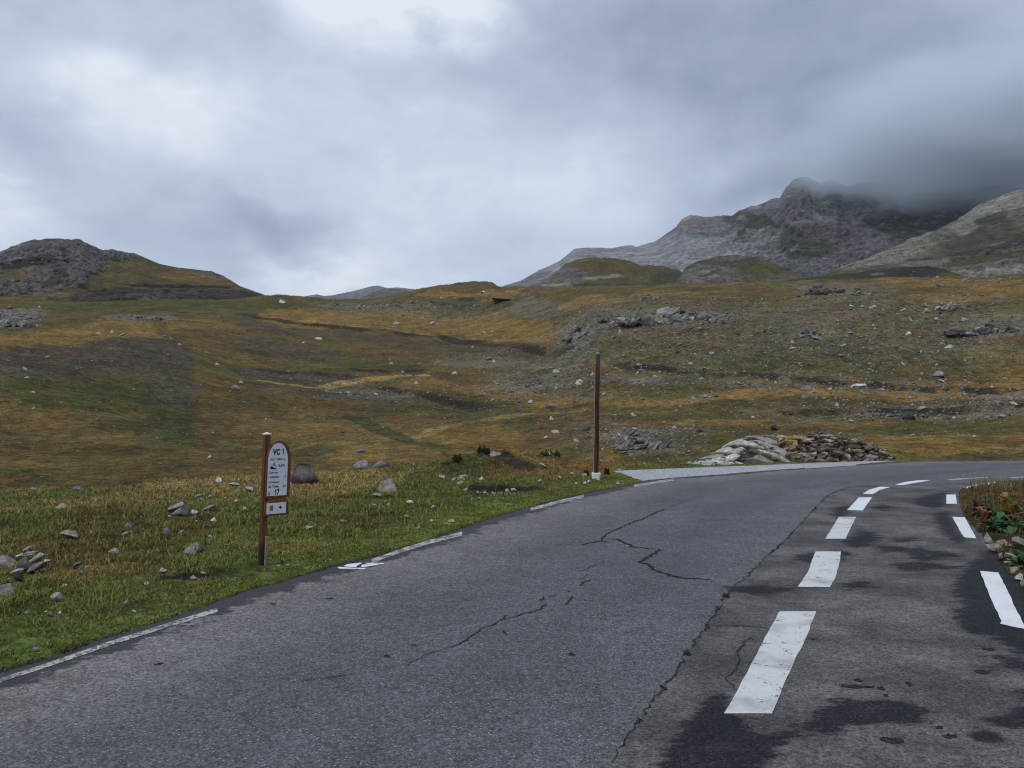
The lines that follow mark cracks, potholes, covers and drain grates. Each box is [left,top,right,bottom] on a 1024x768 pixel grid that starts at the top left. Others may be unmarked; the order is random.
crack [407,489,702,665]
crack [610,485,859,763]
